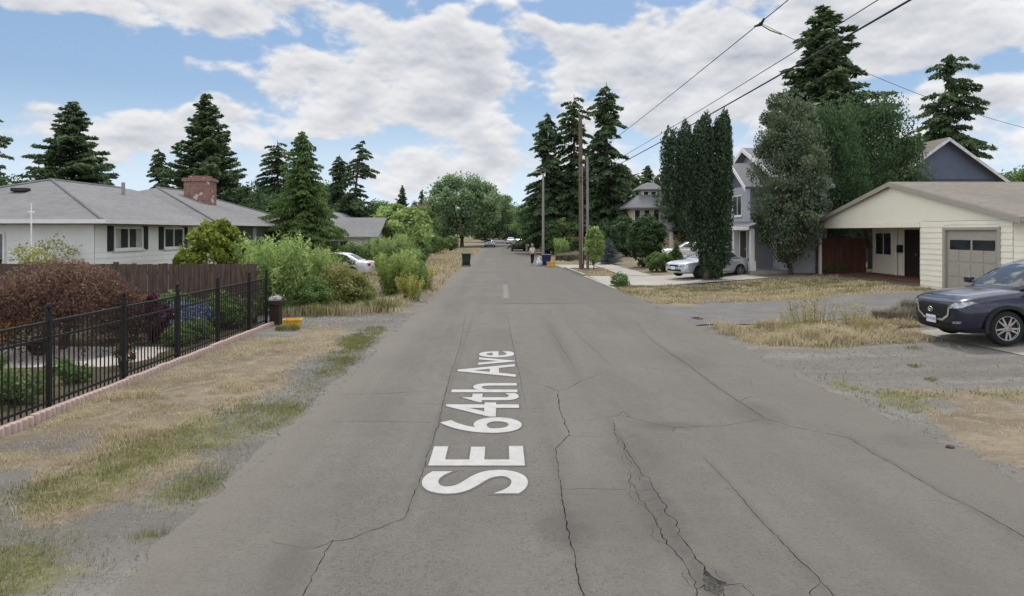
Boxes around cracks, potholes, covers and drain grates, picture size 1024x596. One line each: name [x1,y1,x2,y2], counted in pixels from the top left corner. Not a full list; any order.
crack [541,325,1024,596]
pothole [703,570,727,596]
